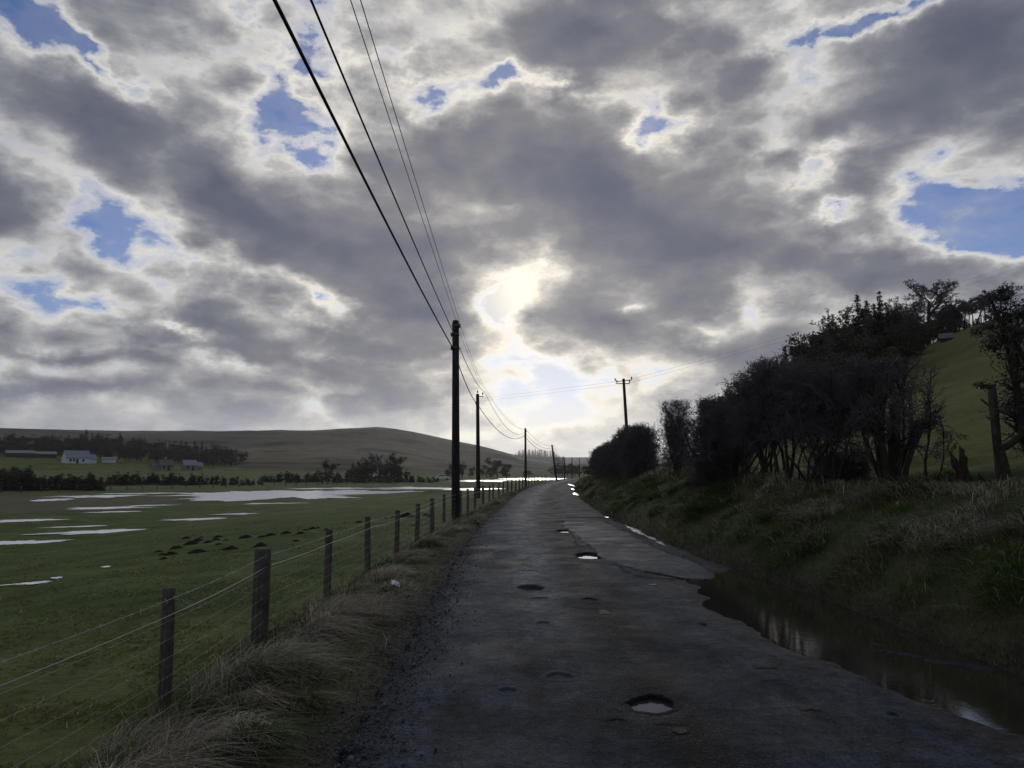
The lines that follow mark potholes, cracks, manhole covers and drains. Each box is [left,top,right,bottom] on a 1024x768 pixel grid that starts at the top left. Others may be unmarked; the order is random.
pothole [492,686,524,696]
pothole [540,670,581,682]
pothole [618,692,683,716]
